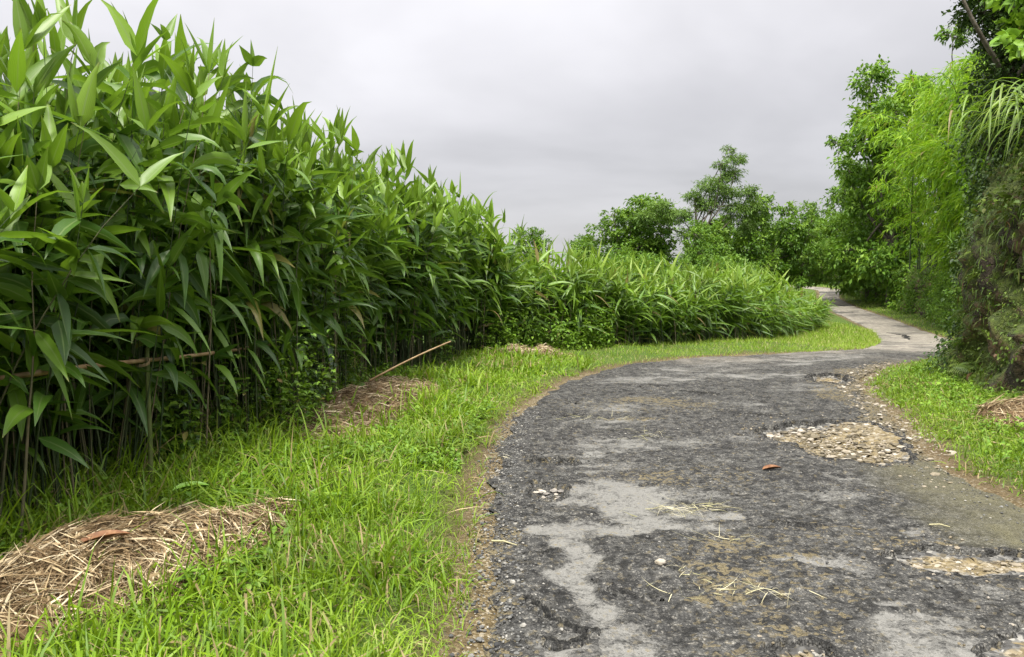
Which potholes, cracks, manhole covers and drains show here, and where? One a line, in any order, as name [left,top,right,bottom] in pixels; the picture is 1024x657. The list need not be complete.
pothole [870,542,1024,579]
pothole [970,615,1024,657]
pothole [804,372,854,385]
pothole [750,419,919,468]
crack [525,587,663,652]
